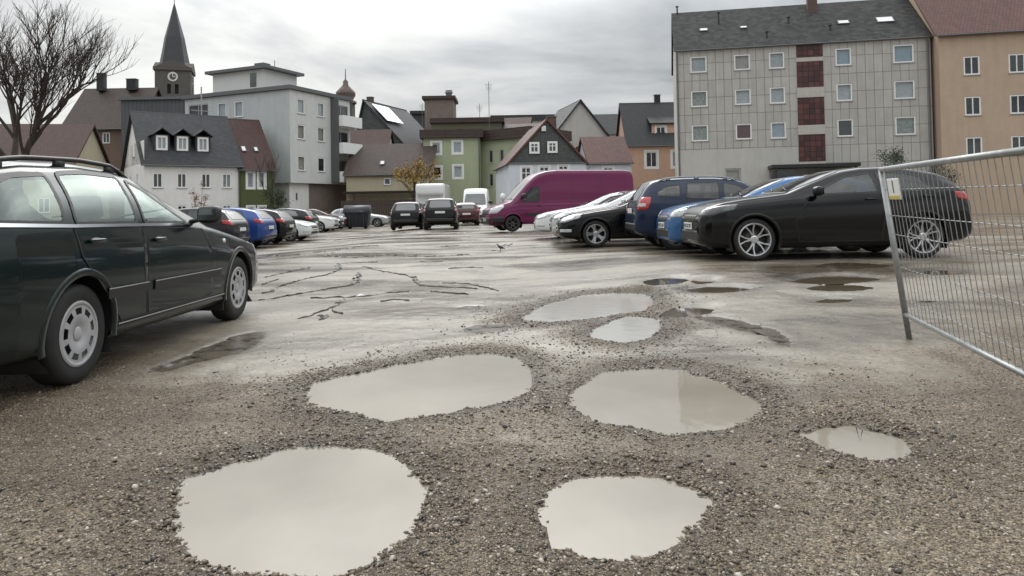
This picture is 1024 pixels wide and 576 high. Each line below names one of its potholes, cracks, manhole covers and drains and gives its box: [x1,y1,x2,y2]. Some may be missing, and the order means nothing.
pothole [172,446,429,576]
crack [259,232,513,320]
pothole [152,332,265,372]
pothole [793,276,880,285]
pothole [306,354,532,422]
pothole [565,369,762,435]
pothole [643,277,689,285]
pothole [799,426,911,461]
pothole [590,317,660,343]
pothole [695,316,791,346]
pothole [538,476,713,561]
pothole [523,294,653,322]
